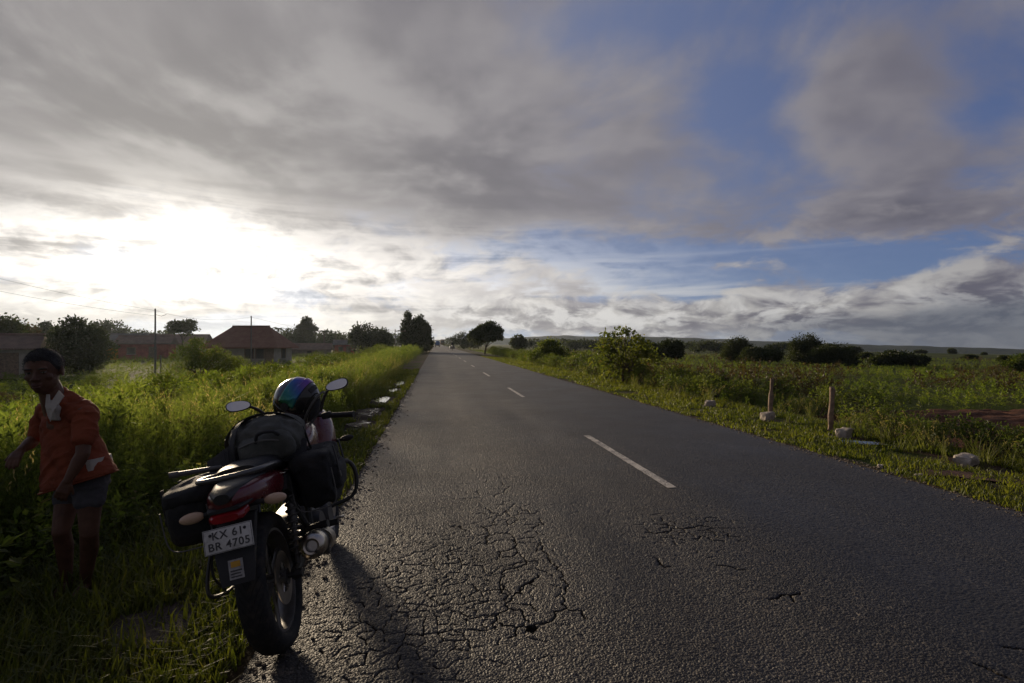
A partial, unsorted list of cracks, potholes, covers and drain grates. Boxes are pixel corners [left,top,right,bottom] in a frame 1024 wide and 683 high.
crack [646,514,742,568]
crack [768,592,801,603]
crack [320,470,588,683]
